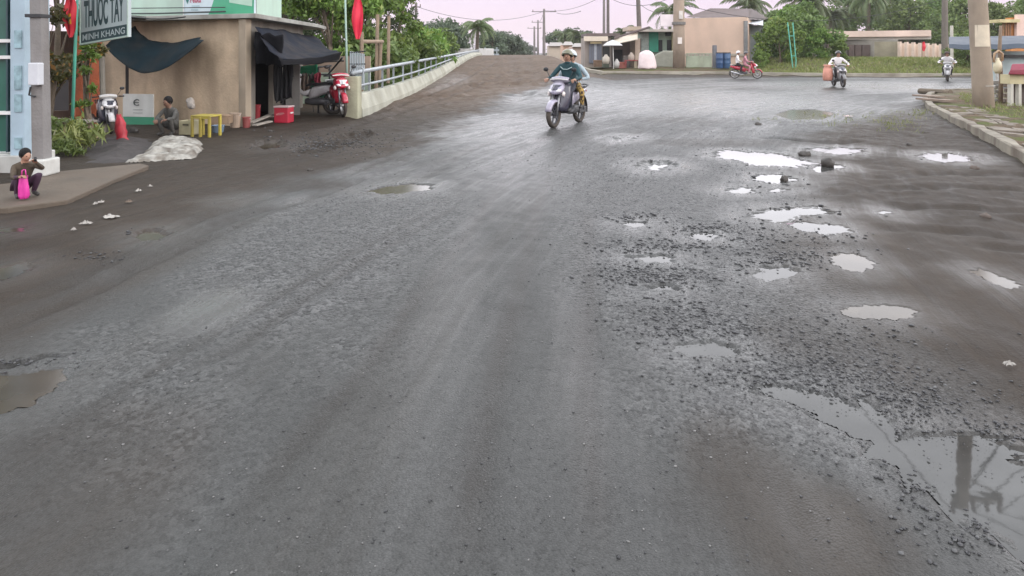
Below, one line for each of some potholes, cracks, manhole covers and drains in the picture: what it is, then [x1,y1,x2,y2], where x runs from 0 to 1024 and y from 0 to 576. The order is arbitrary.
pothole [952,264,1024,295]
pothole [624,159,686,173]
pothole [716,185,765,195]
pothole [674,228,732,244]
pothole [795,146,872,156]
pothole [646,332,758,363]
pothole [722,373,1024,576]
pothole [355,181,441,196]
pothole [780,220,868,238]
pothole [810,249,894,275]
pothole [771,109,839,120]
pothole [0,358,95,421]
